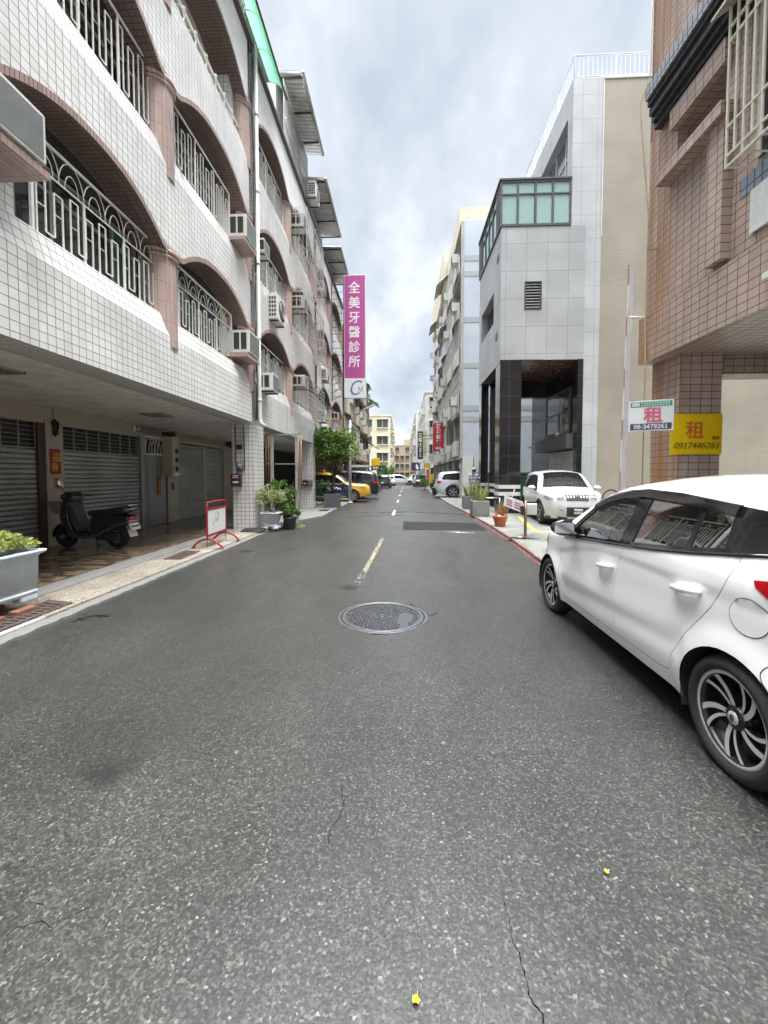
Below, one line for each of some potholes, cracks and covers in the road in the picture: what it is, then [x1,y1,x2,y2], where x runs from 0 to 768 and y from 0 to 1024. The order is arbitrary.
crack [328,785,375,847]
crack [2,871,127,963]
crack [497,857,544,1024]
manhole cover [338,602,428,634]
